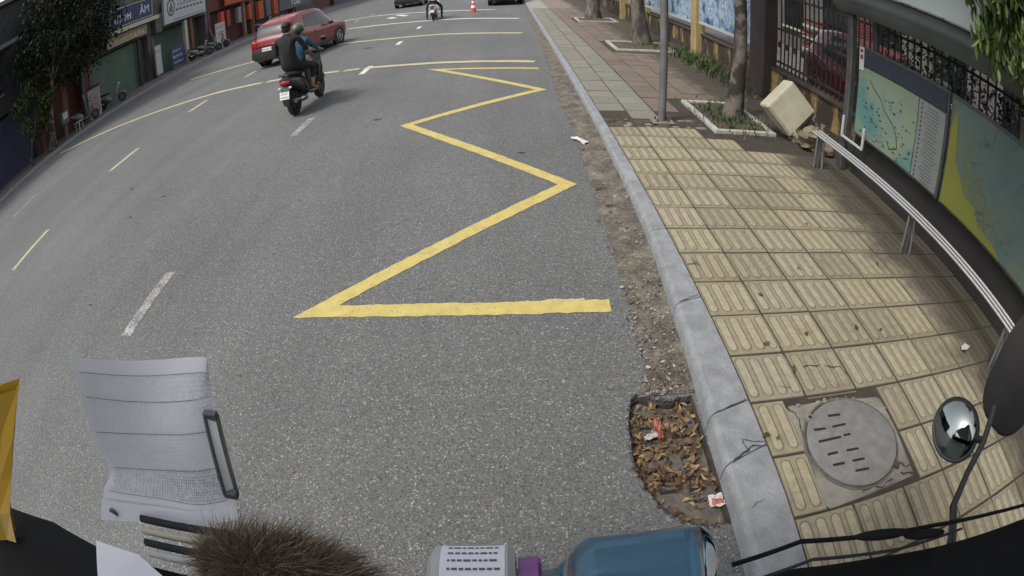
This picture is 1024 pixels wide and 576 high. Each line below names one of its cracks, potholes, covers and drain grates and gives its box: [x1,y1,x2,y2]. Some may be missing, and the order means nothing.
manhole cover [802,398,900,490]
